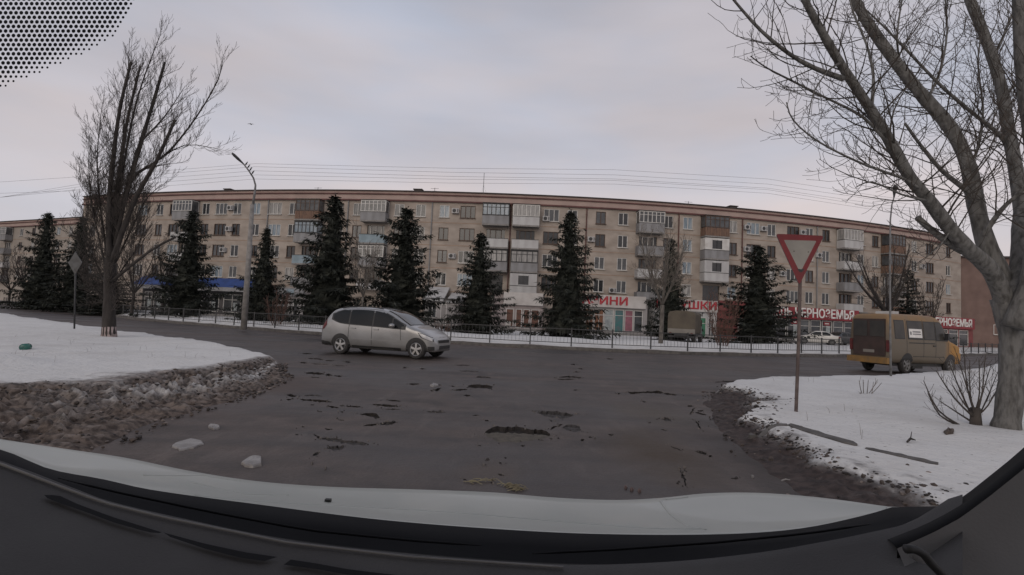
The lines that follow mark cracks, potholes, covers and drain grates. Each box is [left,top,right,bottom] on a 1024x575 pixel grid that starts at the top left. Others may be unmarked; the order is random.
crack [664,393,706,428]
pothole [322,438,368,446]
pothole [485,426,550,443]
pothole [537,411,574,419]
